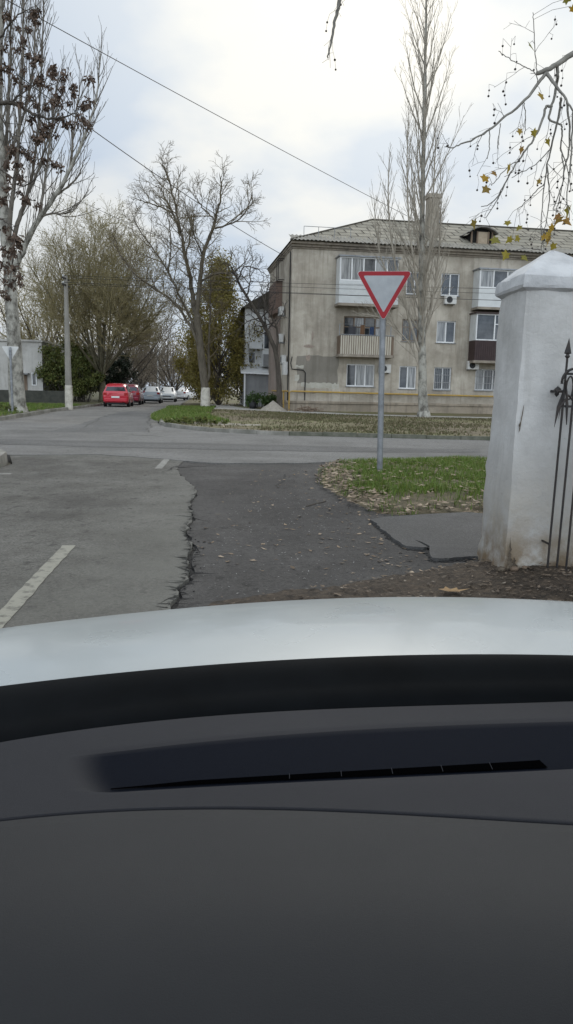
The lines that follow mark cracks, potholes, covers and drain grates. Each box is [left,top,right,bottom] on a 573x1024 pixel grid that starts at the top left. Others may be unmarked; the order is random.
crack [154,493,207,610]
crack [369,522,474,563]
